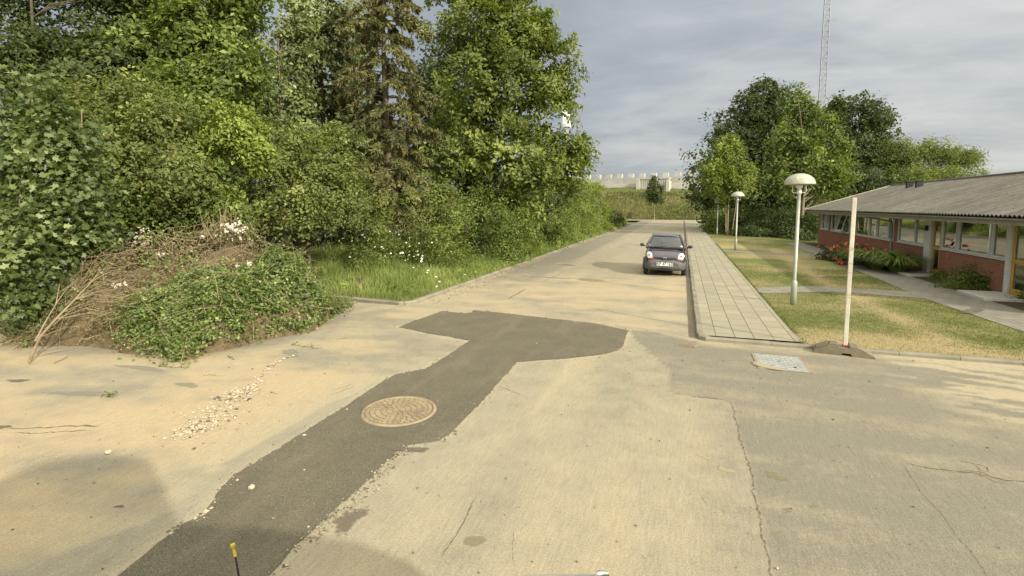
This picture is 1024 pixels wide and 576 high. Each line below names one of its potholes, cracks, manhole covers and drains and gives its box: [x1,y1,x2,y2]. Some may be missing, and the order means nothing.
crack [905,461,1024,575]
manhole cover [360,396,437,427]
crack [11,425,97,434]
manhole cover [751,353,812,373]
